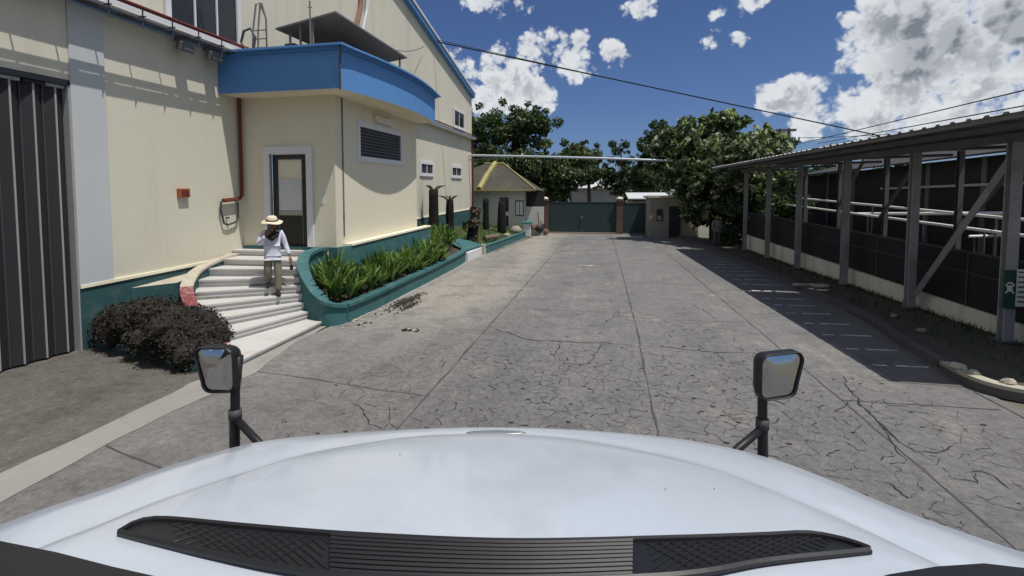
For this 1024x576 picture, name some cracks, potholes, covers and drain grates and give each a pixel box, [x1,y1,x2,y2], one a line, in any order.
crack [647,307,1024,535]
crack [241,307,653,441]
